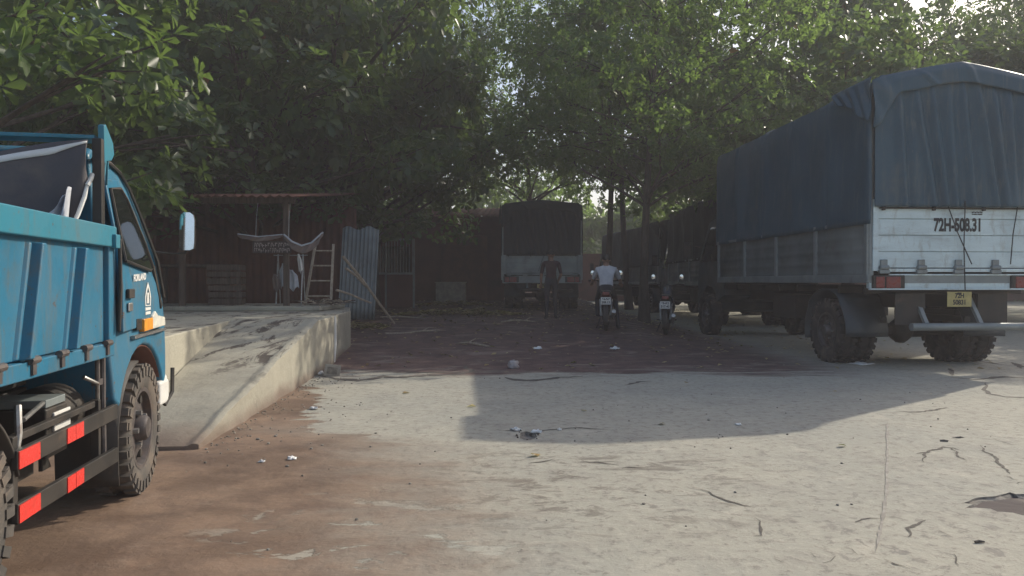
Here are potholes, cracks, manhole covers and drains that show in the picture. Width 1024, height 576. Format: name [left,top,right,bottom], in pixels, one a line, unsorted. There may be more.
crack [700,489,763,536]
crack [948,361,1024,398]
pothole [964,492,1024,515]
crack [920,447,964,462]
crack [905,520,948,537]
crack [981,441,1019,483]
